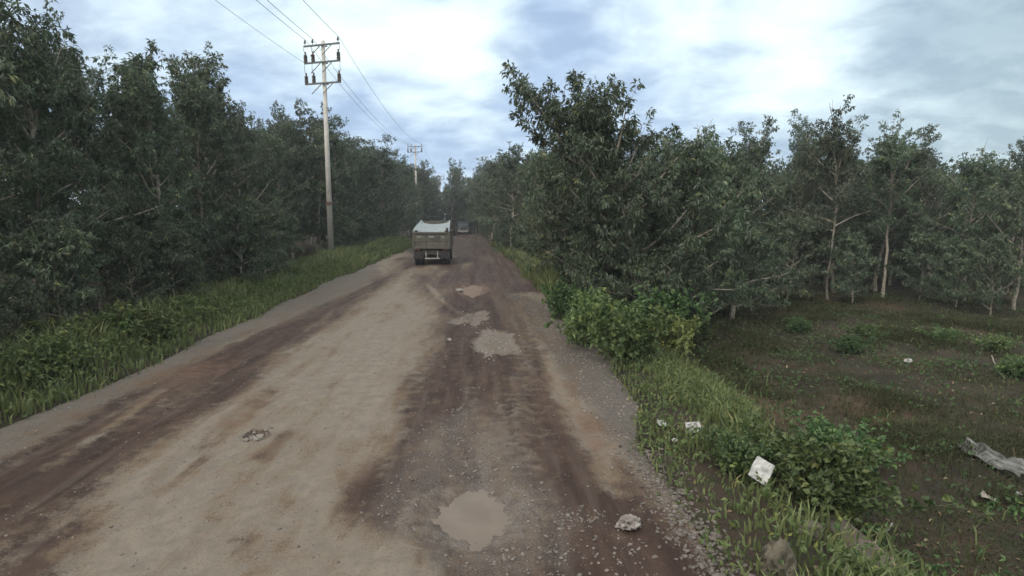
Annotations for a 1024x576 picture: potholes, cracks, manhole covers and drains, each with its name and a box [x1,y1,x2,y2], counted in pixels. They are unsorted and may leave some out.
pothole [454,284,493,299]
pothole [443,309,492,327]
pothole [466,328,524,360]
pothole [241,429,271,441]
